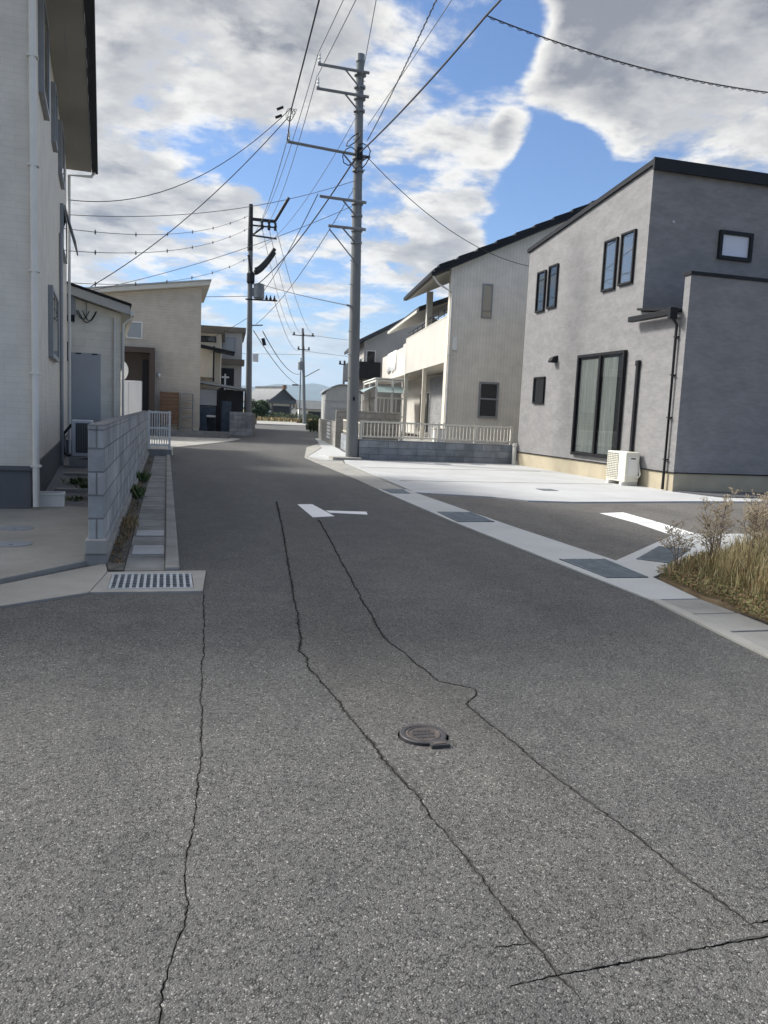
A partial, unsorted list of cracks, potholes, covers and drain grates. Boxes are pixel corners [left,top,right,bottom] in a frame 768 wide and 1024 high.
crack [275,502,768,1000]
drain grate [90,570,206,594]
drain grate [636,546,691,563]
crack [156,594,206,1024]
drain grate [559,558,648,578]
drain grate [437,511,495,522]
manhole cover [399,724,450,749]
